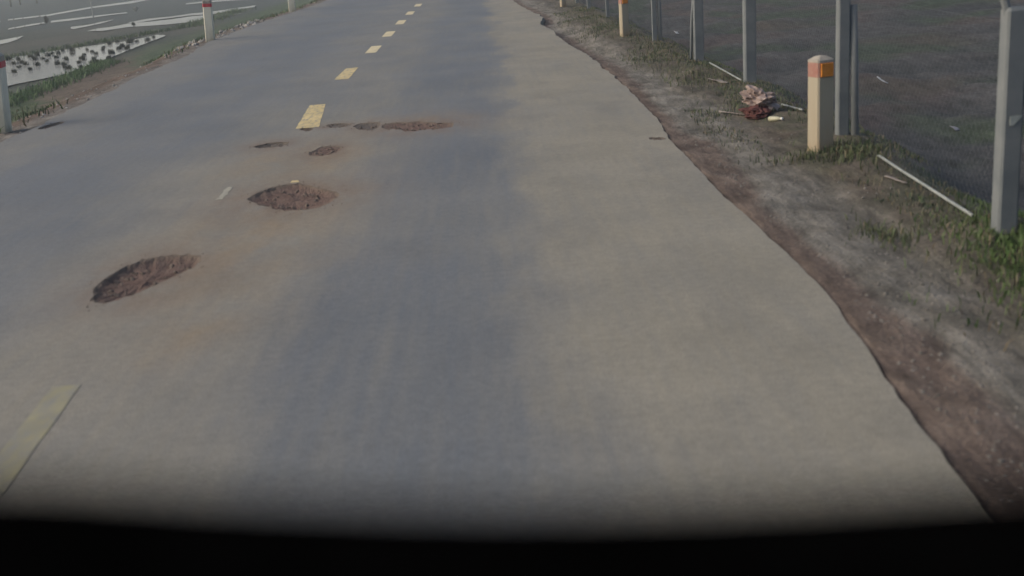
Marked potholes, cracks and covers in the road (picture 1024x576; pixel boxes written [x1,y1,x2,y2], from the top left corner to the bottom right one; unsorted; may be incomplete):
pothole [351,121,386,131]
pothole [374,121,463,132]
pothole [87,253,204,311]
pothole [305,145,343,156]
pothole [247,183,346,213]
